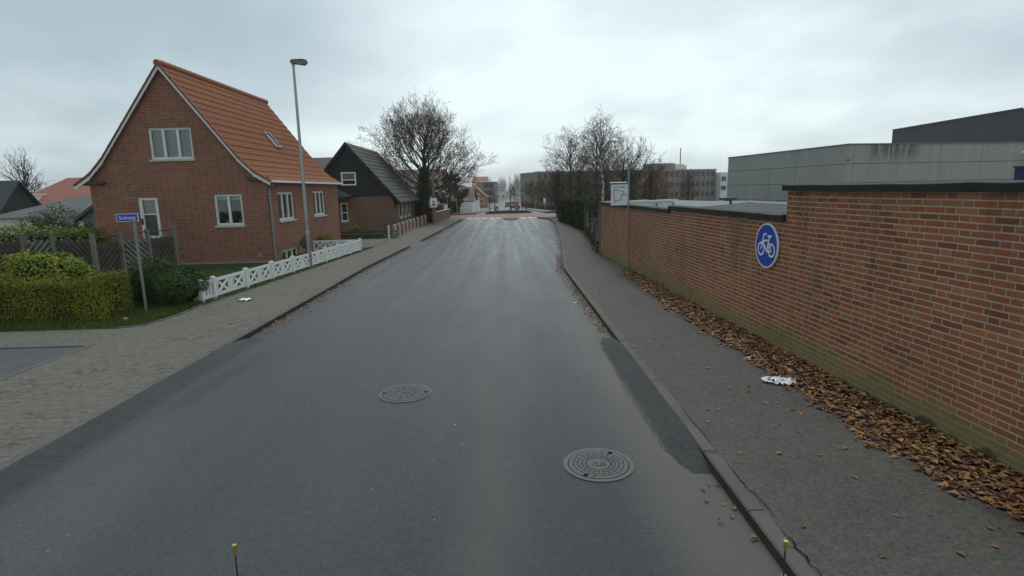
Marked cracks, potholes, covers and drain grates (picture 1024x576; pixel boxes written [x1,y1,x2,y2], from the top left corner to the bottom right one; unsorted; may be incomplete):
crack [784,533,822,576]
manhole cover [563,448,634,482]
manhole cover [378,384,432,403]
